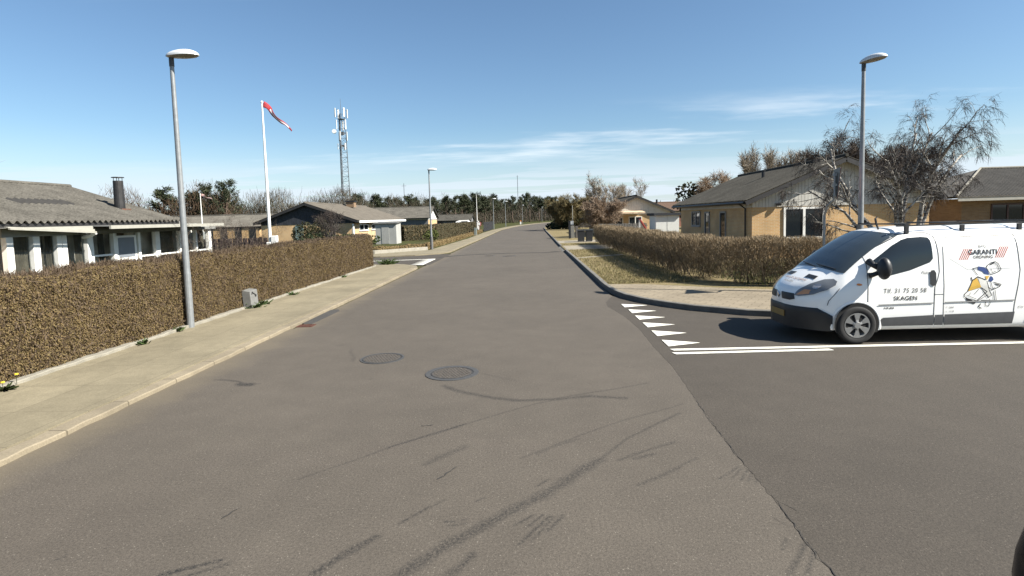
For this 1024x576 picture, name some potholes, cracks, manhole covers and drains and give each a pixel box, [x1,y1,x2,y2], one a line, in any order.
manhole cover [360,353,404,364]
manhole cover [425,366,479,381]
